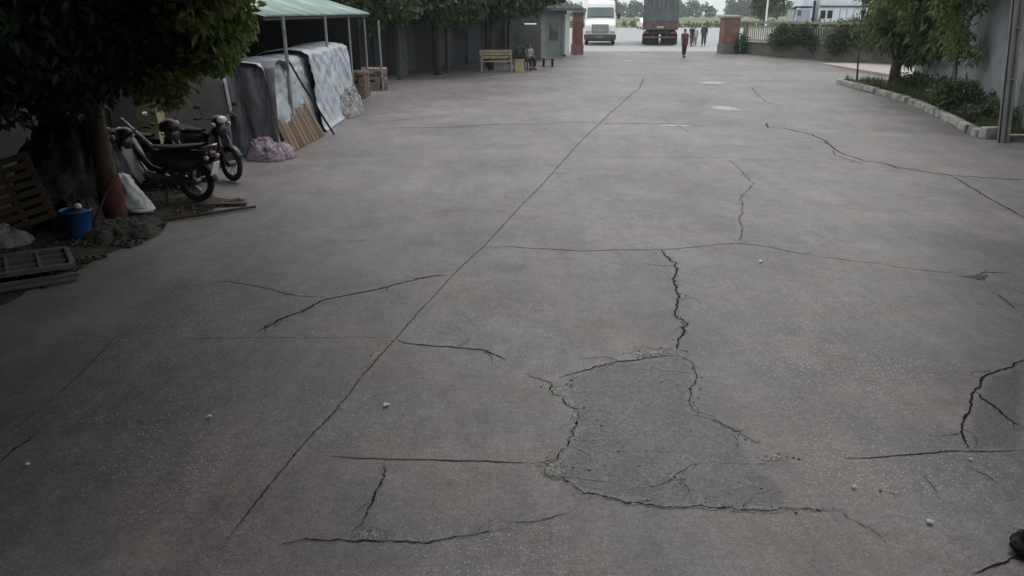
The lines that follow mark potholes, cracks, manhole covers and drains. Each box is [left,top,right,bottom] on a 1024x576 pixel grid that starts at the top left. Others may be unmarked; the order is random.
crack [505,160,878,534]
crack [931,360,1024,447]
crack [229,275,438,332]
crack [766,123,1023,217]
crack [399,340,503,363]
crack [282,468,504,544]
crack [974,555,1021,574]
